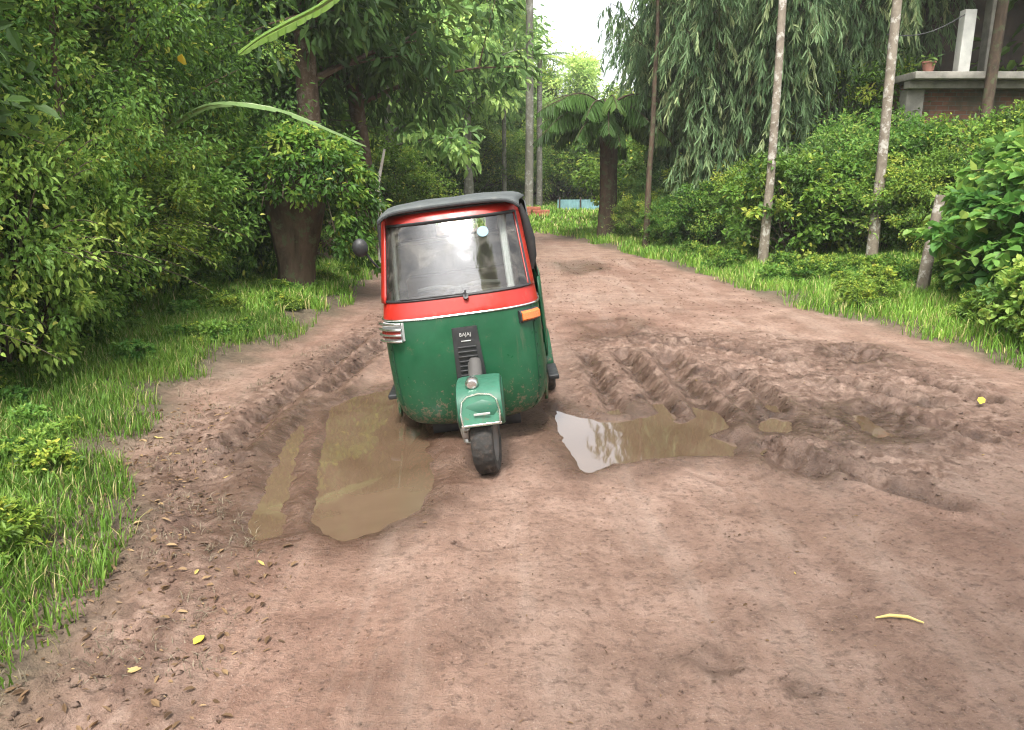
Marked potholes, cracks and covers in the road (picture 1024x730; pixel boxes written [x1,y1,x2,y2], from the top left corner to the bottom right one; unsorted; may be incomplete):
pothole [723,403,810,433]
pothole [561,261,602,274]
pothole [234,402,320,548]
pothole [548,398,768,473]
pothole [837,406,918,440]
pothole [306,389,443,542]
